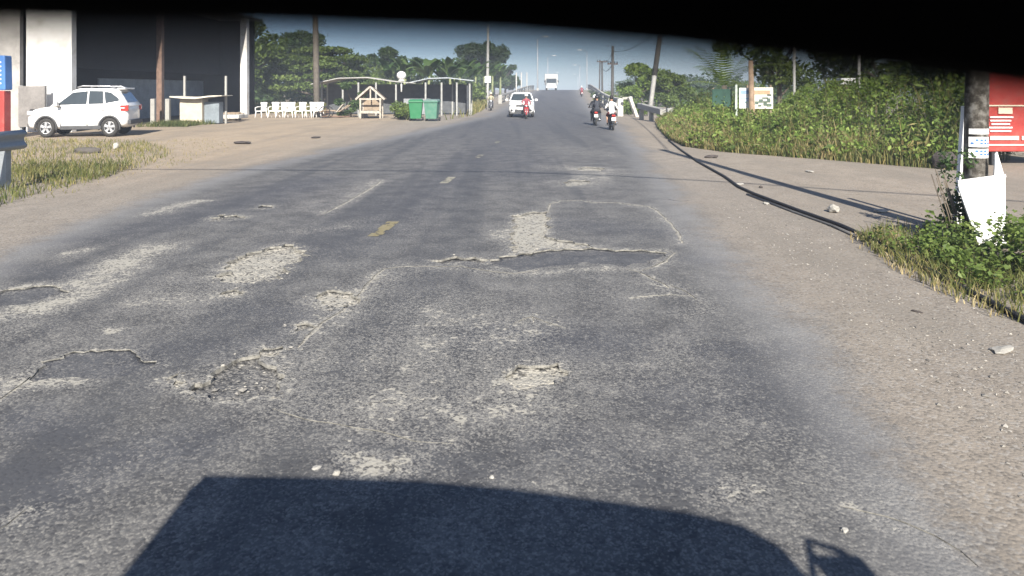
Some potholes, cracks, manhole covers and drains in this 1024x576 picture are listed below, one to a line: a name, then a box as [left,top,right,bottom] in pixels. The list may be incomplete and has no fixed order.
pothole [508,211,592,255]
pothole [0,285,70,306]
pothole [215,244,311,283]
pothole [490,247,666,271]
crack [297,266,537,348]
pothole [505,363,569,391]
pothole [29,349,157,382]
pothole [188,355,286,402]
